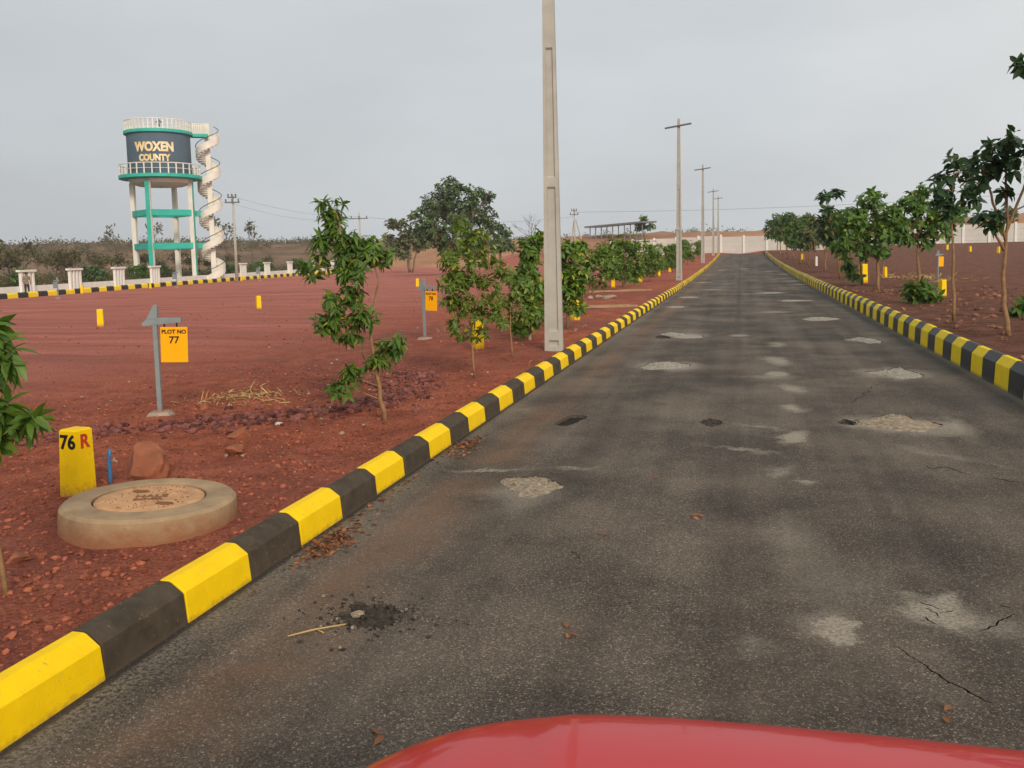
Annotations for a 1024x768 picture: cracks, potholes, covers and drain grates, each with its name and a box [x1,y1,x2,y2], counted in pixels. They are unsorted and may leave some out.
pothole [699,418,723,427]
pothole [554,415,587,426]
crack [895,646,992,703]
pothole [334,601,402,630]
crack [977,605,1015,632]
manhole cover [57,478,238,550]
